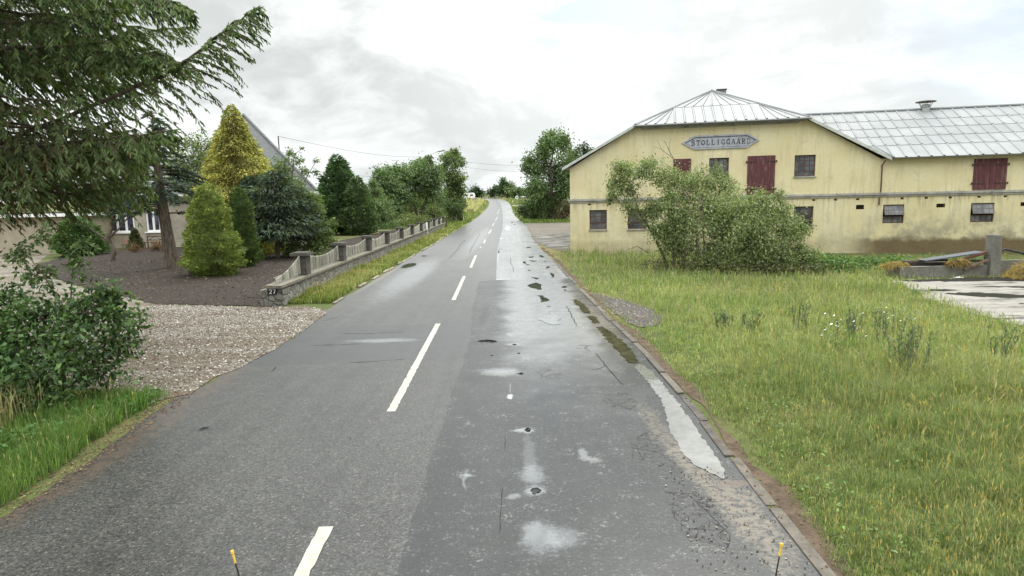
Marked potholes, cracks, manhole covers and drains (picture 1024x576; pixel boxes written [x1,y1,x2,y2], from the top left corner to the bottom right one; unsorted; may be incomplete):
crack [575,345,639,409]
crack [632,431,668,467]
crack [666,491,730,549]
